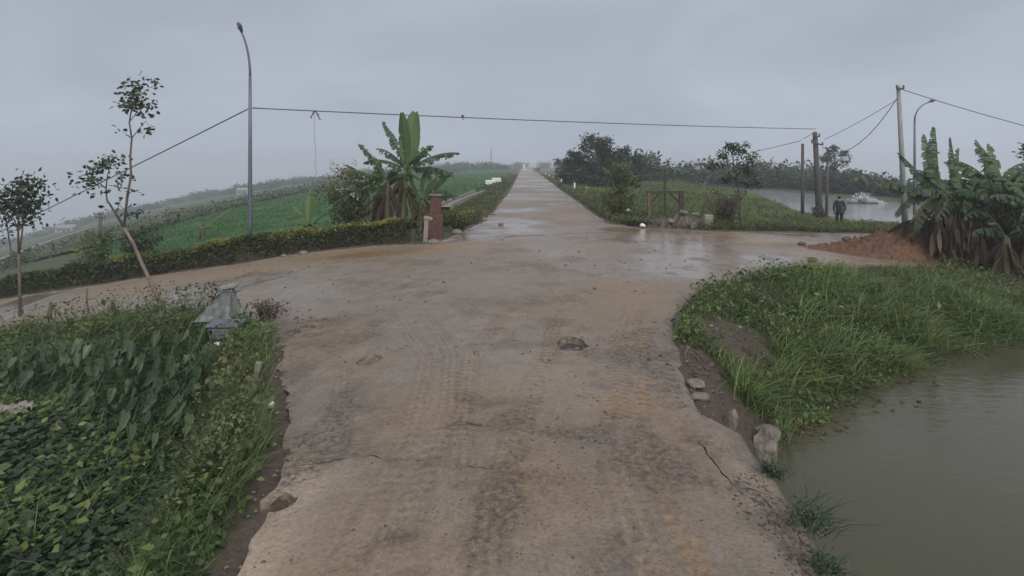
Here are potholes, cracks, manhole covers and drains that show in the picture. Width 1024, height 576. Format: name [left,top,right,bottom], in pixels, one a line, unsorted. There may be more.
pothole [356,355,382,365]
crack [300,455,488,470]
pothole [270,494,298,507]
crack [698,442,770,495]
pothole [557,336,589,351]
